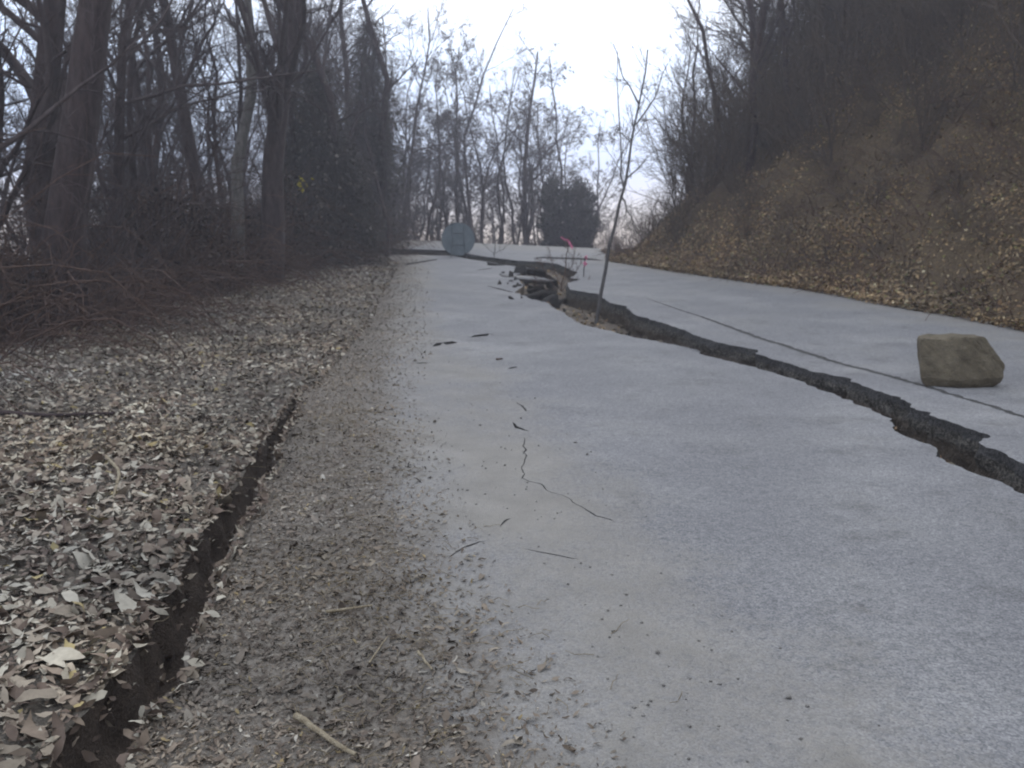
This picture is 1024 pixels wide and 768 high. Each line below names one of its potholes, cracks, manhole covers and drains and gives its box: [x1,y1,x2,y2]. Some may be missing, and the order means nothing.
crack [379,248,1024,521]
